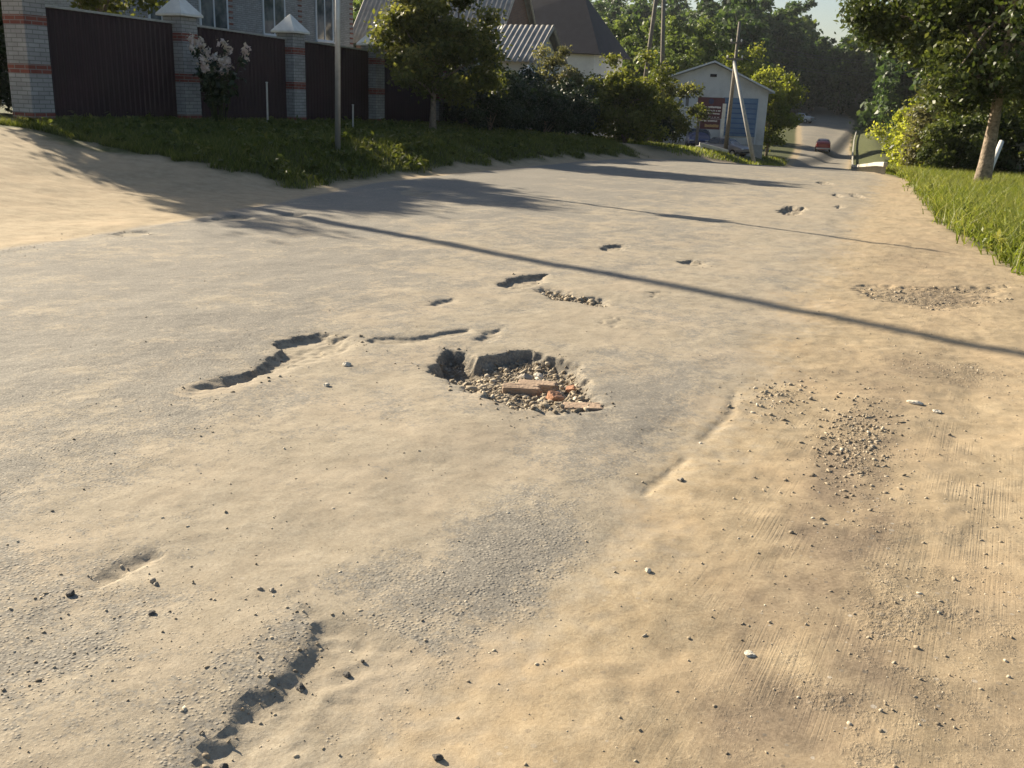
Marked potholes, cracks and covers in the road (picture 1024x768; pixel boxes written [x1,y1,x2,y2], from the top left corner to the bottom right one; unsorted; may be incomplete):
pothole [425,298,460,307]
pothole [677,259,712,267]
pothole [851,284,1016,311]
pothole [472,327,508,343]
pothole [496,273,551,289]
pothole [776,205,809,216]
pothole [534,286,614,307]
pothole [600,243,631,251]
pothole [191,580,441,768]
pothole [425,348,614,417]
pothole [89,547,181,591]
pothole [171,332,369,400]
